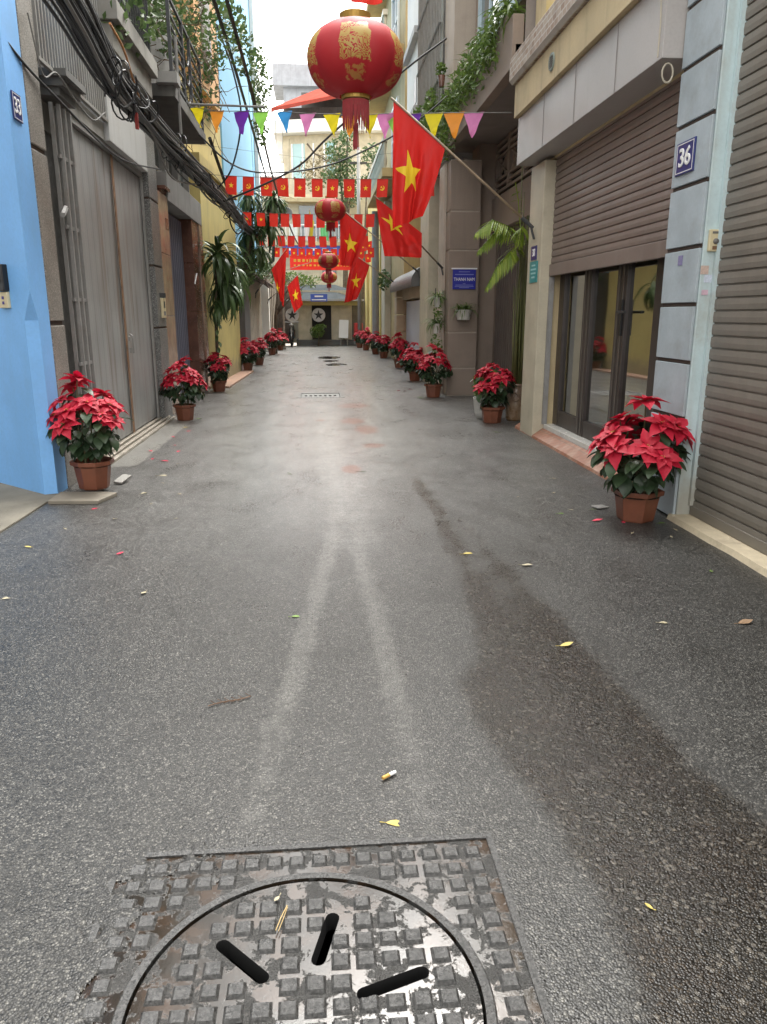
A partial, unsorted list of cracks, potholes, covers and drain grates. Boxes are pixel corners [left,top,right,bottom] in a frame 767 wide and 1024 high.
manhole cover [41,833,555,1024]
